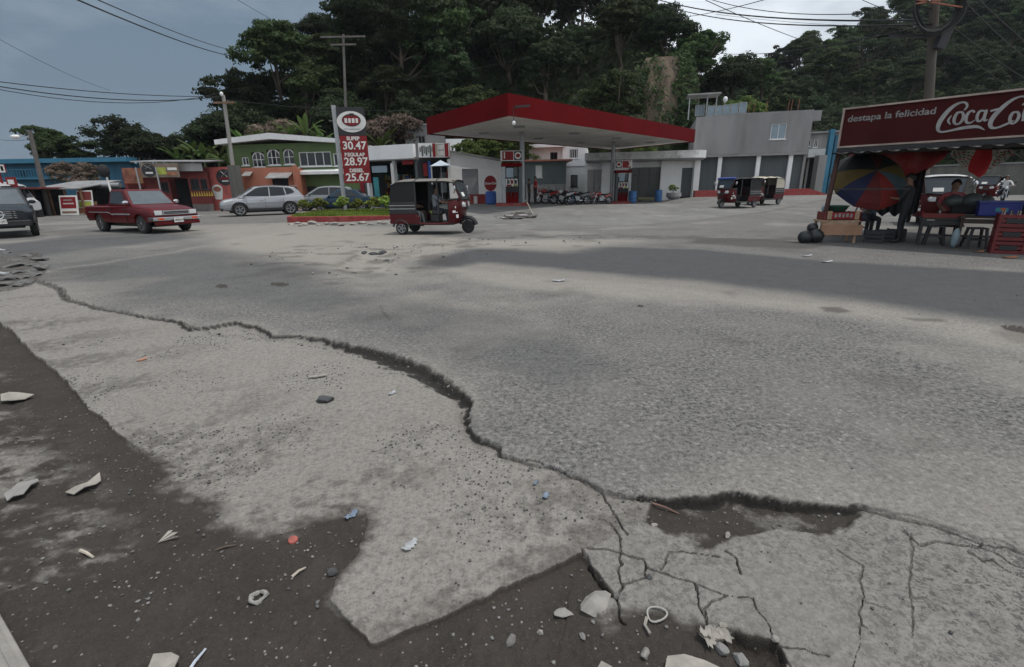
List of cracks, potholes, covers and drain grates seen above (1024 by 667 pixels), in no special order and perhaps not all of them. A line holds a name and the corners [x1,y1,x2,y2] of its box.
pothole [0,252,50,291]
pothole [643,487,864,548]
crack [43,279,194,328]
crack [486,438,1024,667]
